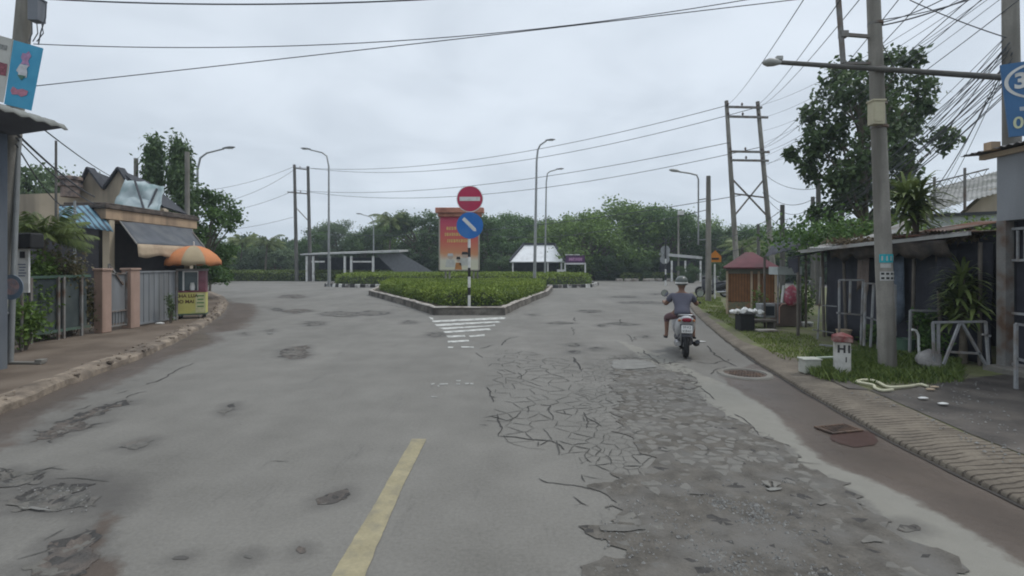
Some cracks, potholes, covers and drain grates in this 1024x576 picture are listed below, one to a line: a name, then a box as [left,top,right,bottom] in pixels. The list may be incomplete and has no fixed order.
pothole [31,400,131,443]
crack [476,319,817,506]
pothole [316,488,350,504]
pothole [121,438,154,450]
pothole [897,524,921,532]
drain grate [814,423,864,435]
pothole [277,345,312,359]
manhole cover [716,367,774,381]
pothole [22,529,102,576]
pothole [7,482,101,512]
